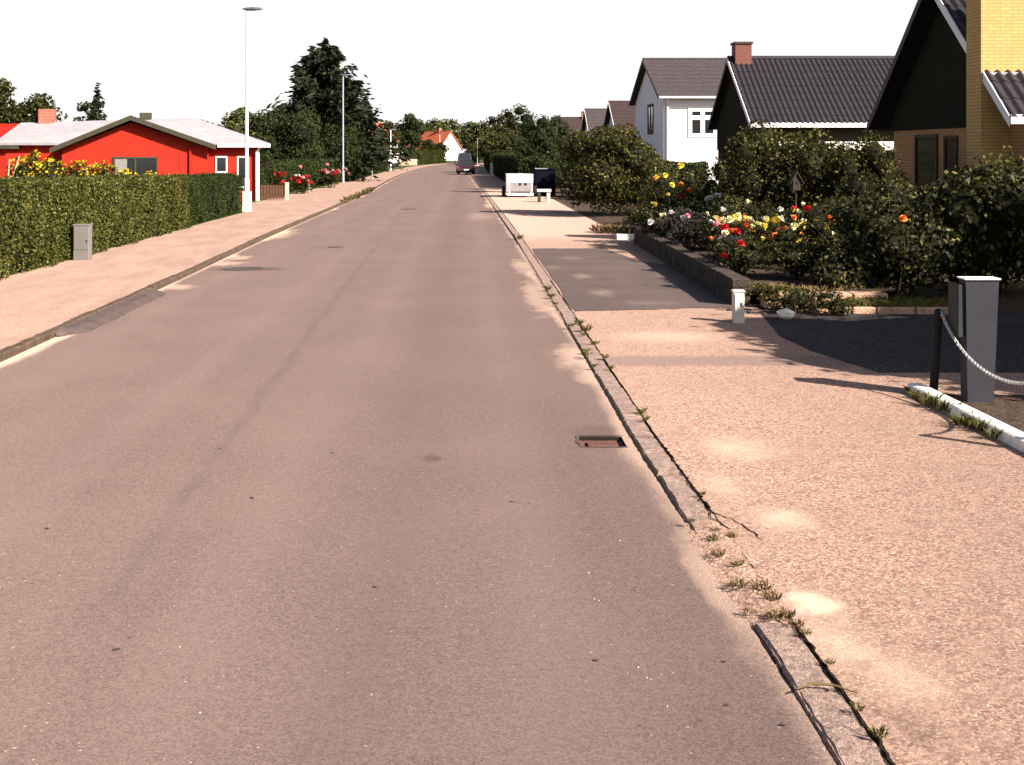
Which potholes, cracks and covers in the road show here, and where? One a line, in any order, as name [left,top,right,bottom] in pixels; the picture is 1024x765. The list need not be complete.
drain grate [575,435,627,447]
crack [564,322,763,540]
